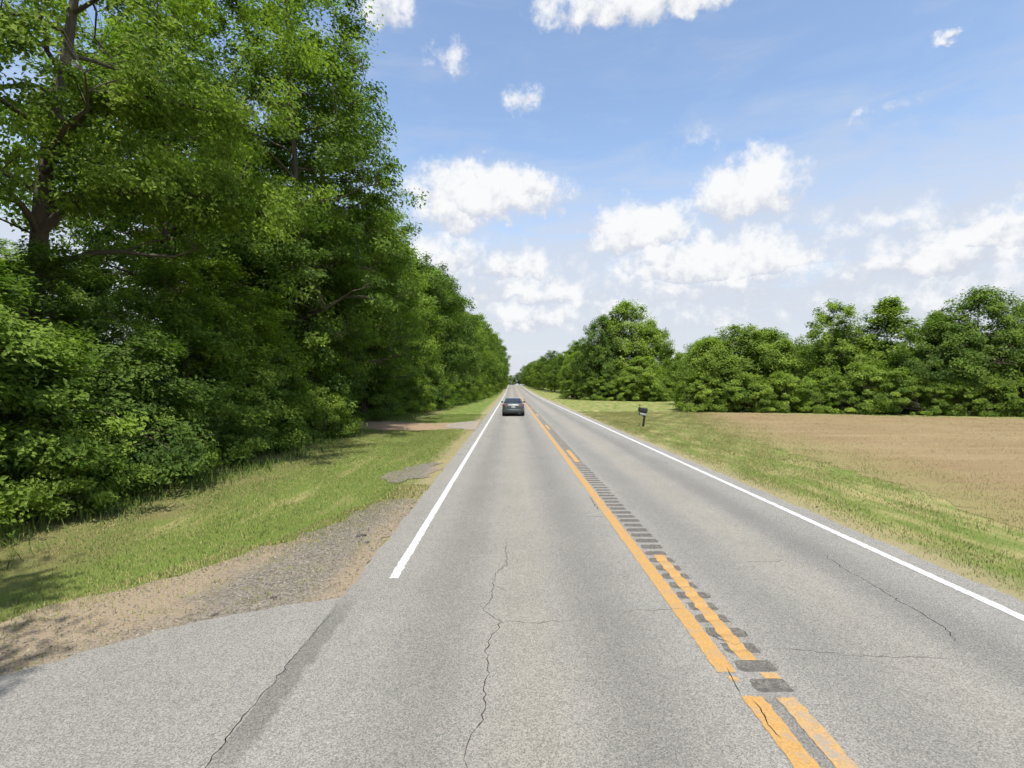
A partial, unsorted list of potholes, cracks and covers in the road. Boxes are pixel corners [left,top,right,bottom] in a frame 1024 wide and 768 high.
crack [464,539,556,768]
crack [827,556,964,649]
